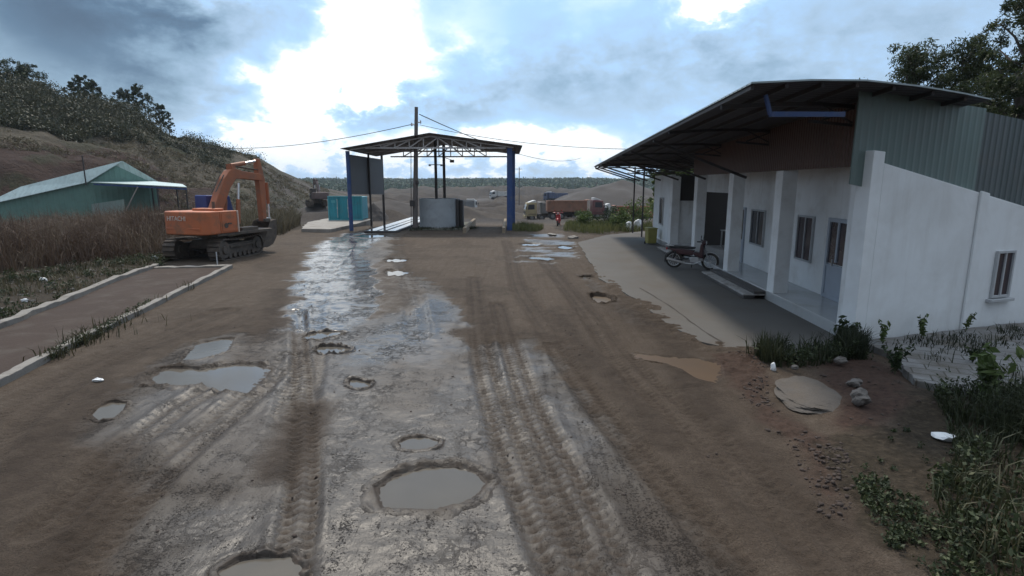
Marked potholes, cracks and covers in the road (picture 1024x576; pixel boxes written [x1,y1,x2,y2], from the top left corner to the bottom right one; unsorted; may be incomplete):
pothole [359,456,502,521]
pothole [391,433,444,453]
pothole [132,359,284,400]
pothole [380,268,412,277]
pothole [585,291,618,304]
pothole [300,327,349,342]
pothole [312,342,356,355]
pothole [208,543,311,576]
pothole [82,399,134,424]
pothole [342,376,377,391]
